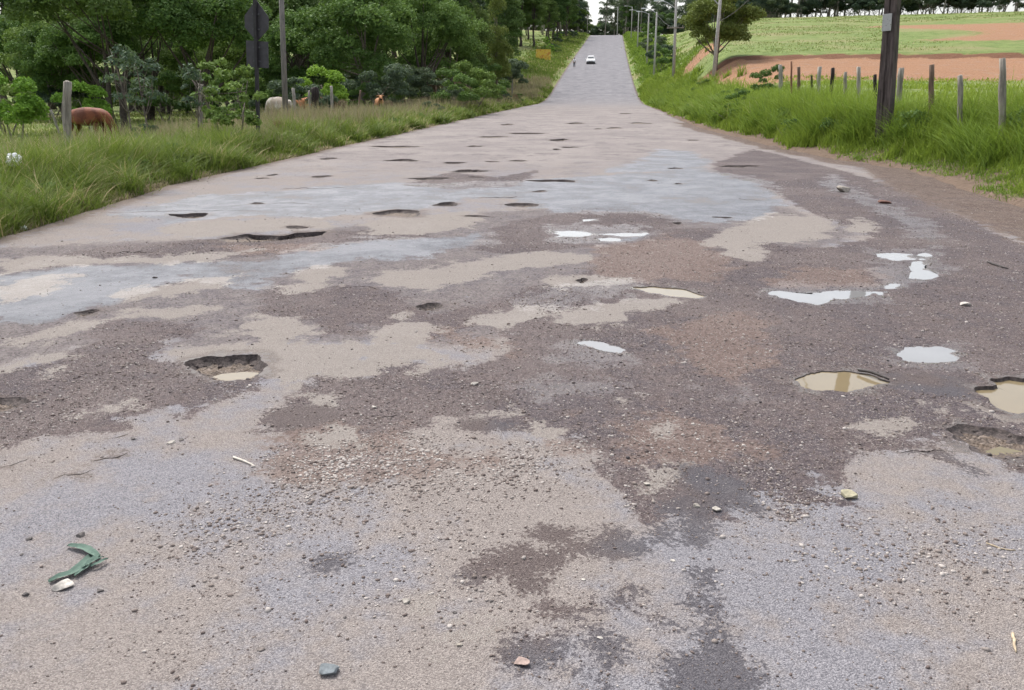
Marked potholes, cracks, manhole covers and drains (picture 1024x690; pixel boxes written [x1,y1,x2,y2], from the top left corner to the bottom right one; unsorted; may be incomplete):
pothole [218,231,326,242]
pothole [183,354,268,381]
pothole [974,376,1024,414]
pothole [372,209,420,217]
pothole [946,424,1024,460]
pothole [794,371,890,392]
pothole [415,303,443,311]
pothole [633,286,705,298]
